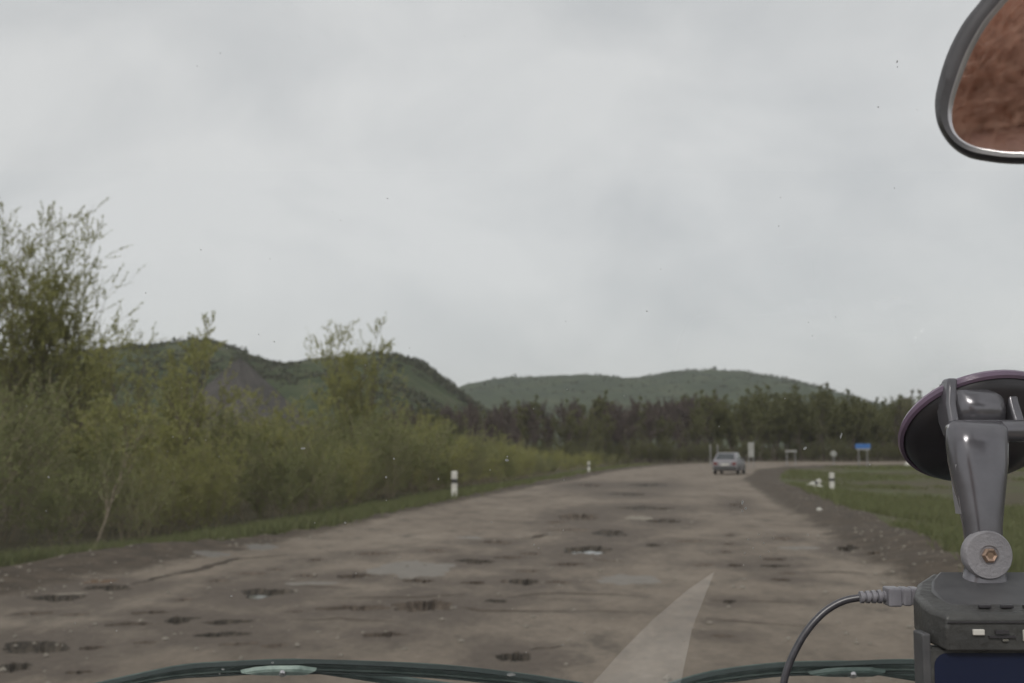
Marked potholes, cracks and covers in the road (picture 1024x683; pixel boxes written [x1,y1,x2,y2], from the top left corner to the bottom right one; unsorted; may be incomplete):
pothole [592,530,628,538]
pothole [164,616,201,625]
pothole [0,662,33,673]
pothole [241,588,294,599]
pothole [2,641,71,654]
pothole [836,544,860,552]
pothole [494,652,531,662]
crack [133,555,284,584]
pothole [563,545,613,554]
pothole [391,599,453,612]
